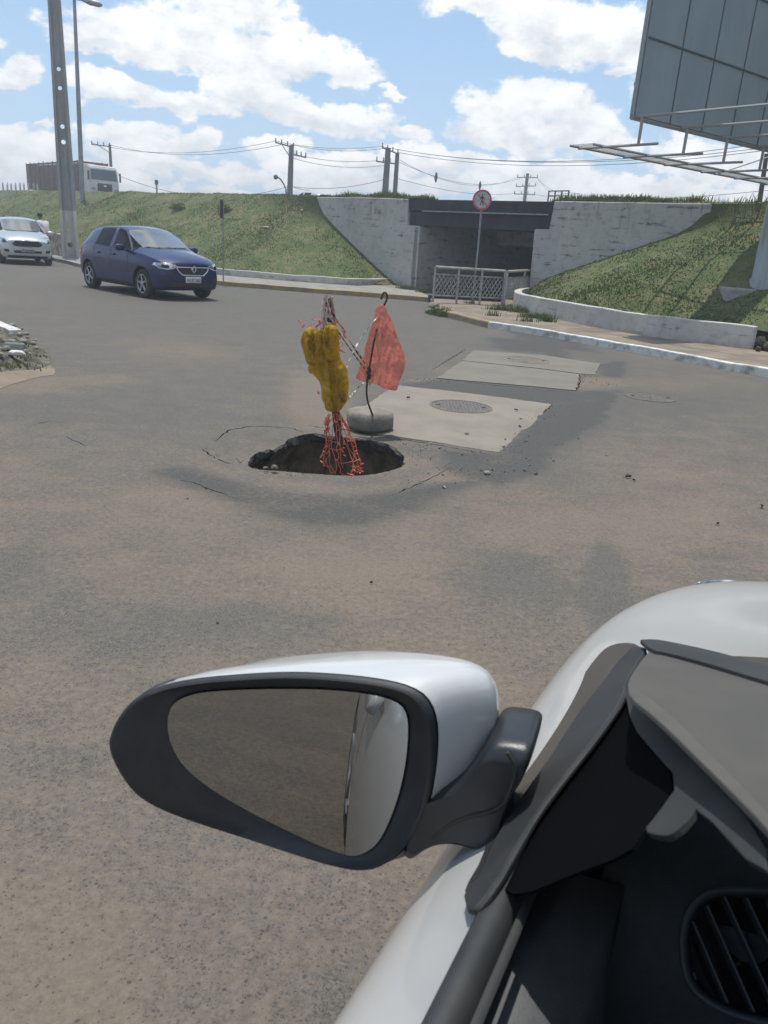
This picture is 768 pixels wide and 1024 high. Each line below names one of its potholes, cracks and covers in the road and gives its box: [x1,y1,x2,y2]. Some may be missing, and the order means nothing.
crack [202,426,302,464]
pothole [247,433,405,476]
manhole cover [429,400,492,413]
manhole cover [624,392,676,402]
manhole cover [502,356,550,364]
